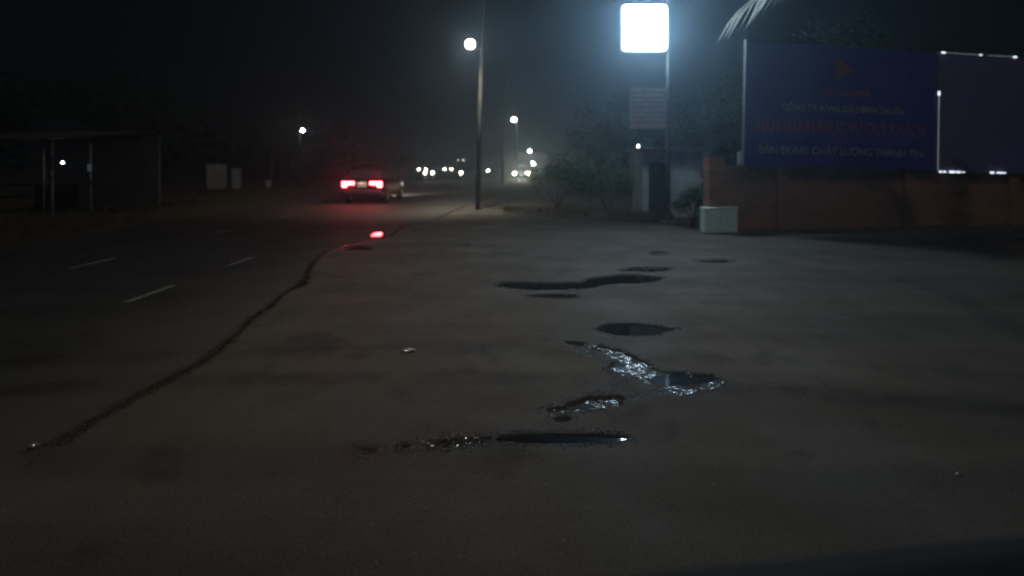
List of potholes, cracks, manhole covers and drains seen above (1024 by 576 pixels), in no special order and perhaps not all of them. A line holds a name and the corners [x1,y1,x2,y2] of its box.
pothole [385,438,420,453]
pothole [540,391,626,416]
pothole [588,343,725,395]
crack [60,204,471,440]
pothole [591,321,680,338]
pothole [489,428,636,448]
pothole [414,432,498,453]
pothole [492,273,671,291]
